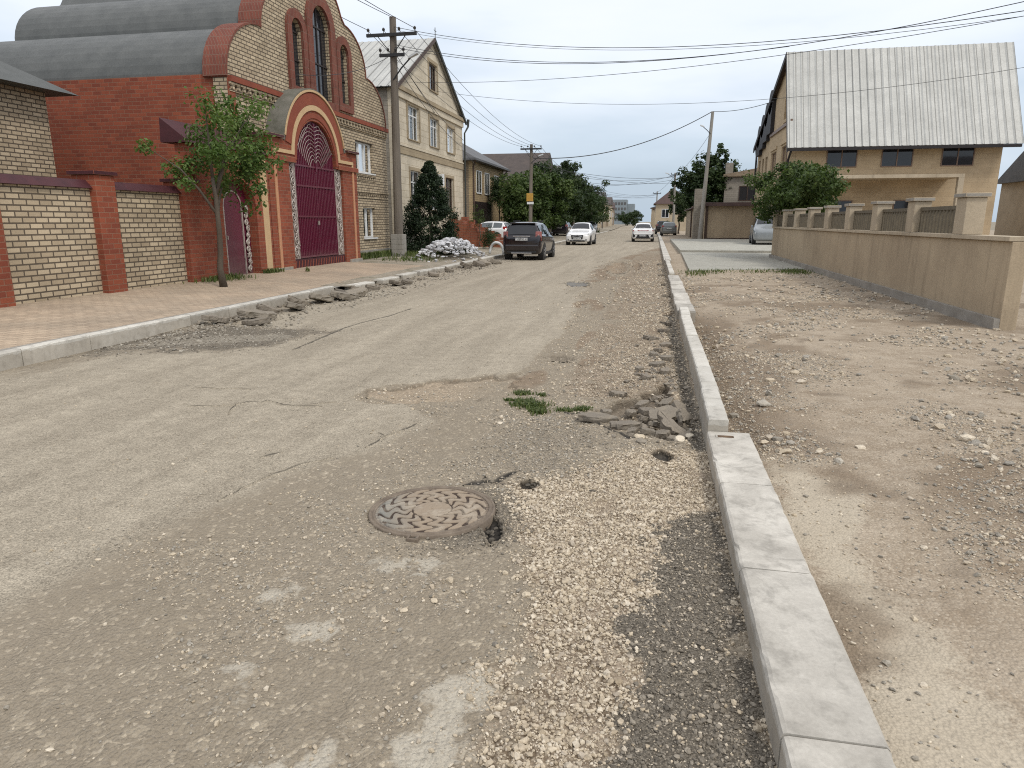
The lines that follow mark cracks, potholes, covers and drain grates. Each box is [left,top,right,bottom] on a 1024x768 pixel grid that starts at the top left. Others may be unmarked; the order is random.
manhole cover [368,486,496,543]
crack [188,387,337,414]
pothole [650,449,677,463]
crack [462,471,519,490]
pothole [478,515,508,547]
pothole [516,479,542,491]
pothole [592,381,704,444]
crack [217,451,333,502]
